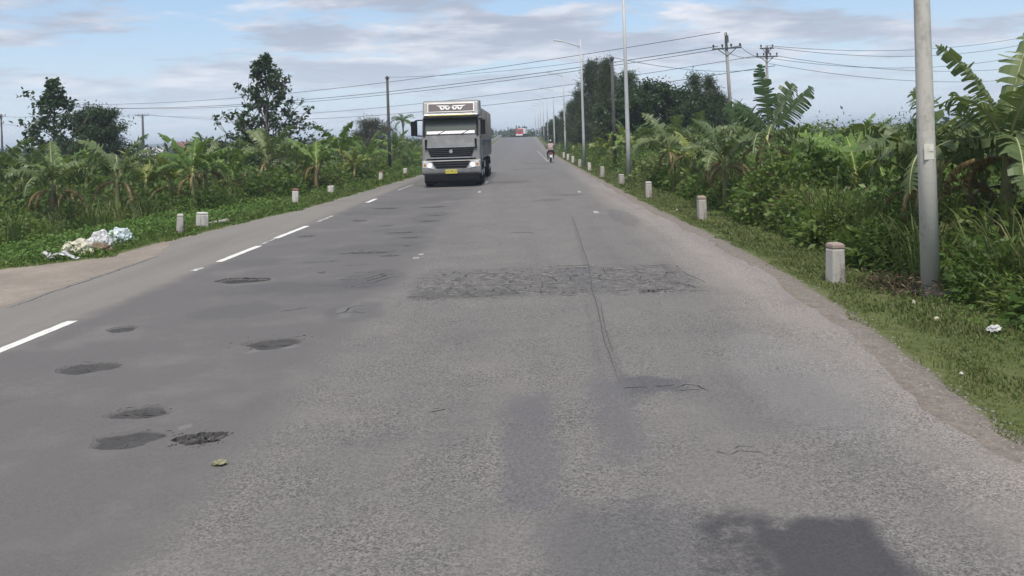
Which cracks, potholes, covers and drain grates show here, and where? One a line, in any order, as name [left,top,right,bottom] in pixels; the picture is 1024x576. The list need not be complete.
pothole [88,428,174,450]
pothole [101,404,172,419]
crack [716,446,763,455]
pothole [54,361,126,375]
pothole [105,325,140,333]
pothole [168,429,233,448]
pothole [228,334,313,350]
